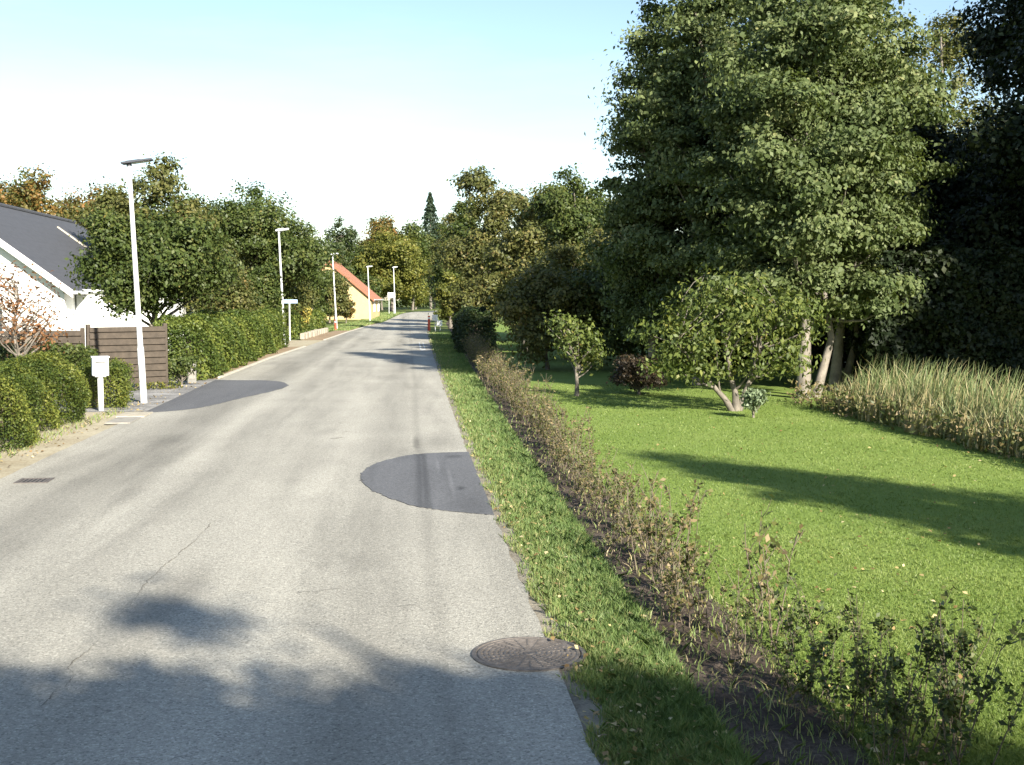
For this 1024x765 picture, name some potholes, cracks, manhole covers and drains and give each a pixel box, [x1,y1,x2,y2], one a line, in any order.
crack [41,523,211,706]
manhole cover [471,637,586,672]
